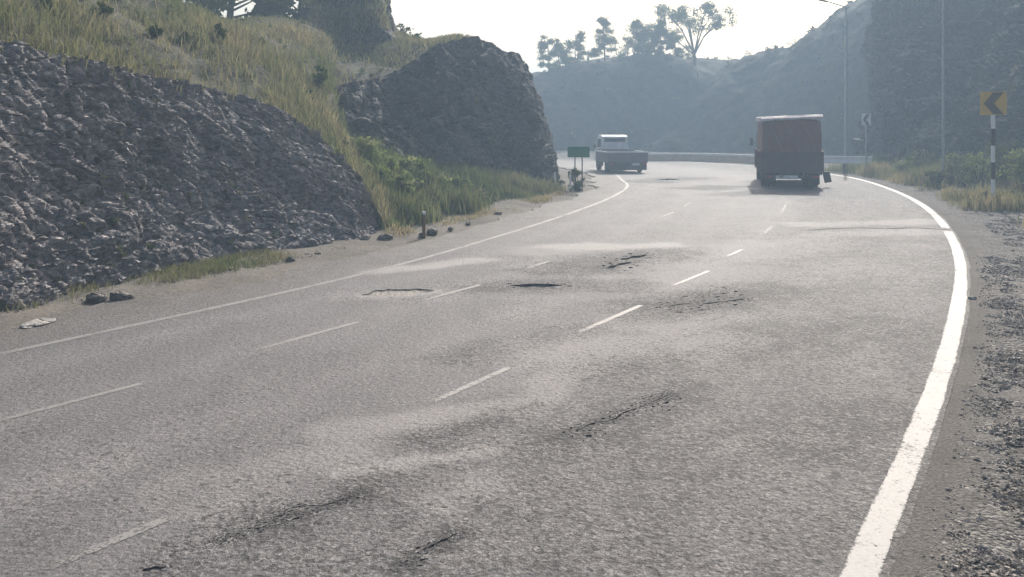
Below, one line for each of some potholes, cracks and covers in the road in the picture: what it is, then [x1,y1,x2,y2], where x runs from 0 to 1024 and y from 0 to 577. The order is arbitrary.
pothole [362,289,435,297]
crack [560,393,681,441]
crack [601,253,646,271]
crack [209,488,368,545]
crack [397,530,466,567]
crack [652,287,751,314]
